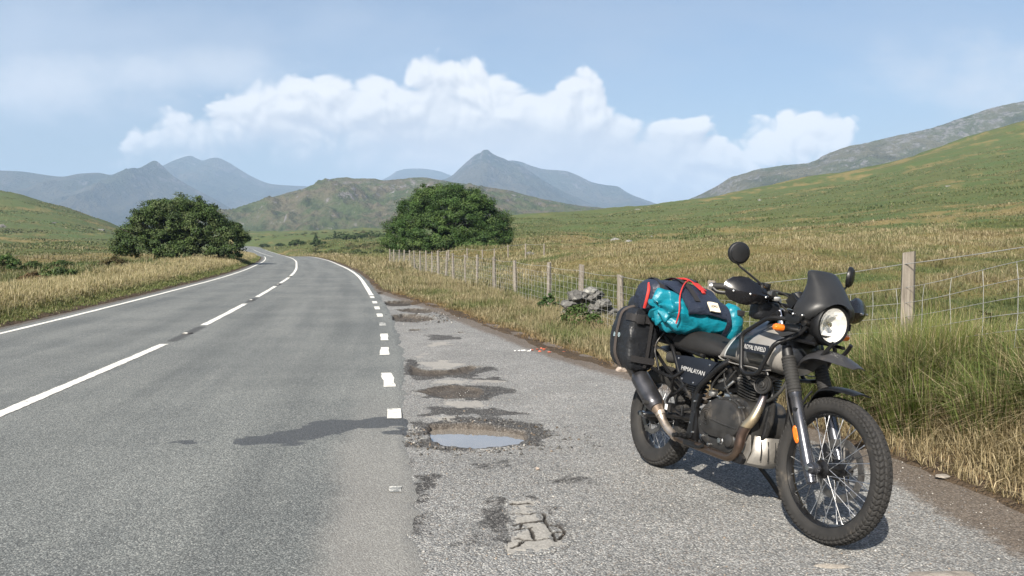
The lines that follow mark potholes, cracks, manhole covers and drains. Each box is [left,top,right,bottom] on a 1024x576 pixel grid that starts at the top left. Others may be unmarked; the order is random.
pothole [403,362,487,378]
pothole [409,384,497,400]
pothole [415,421,539,451]
